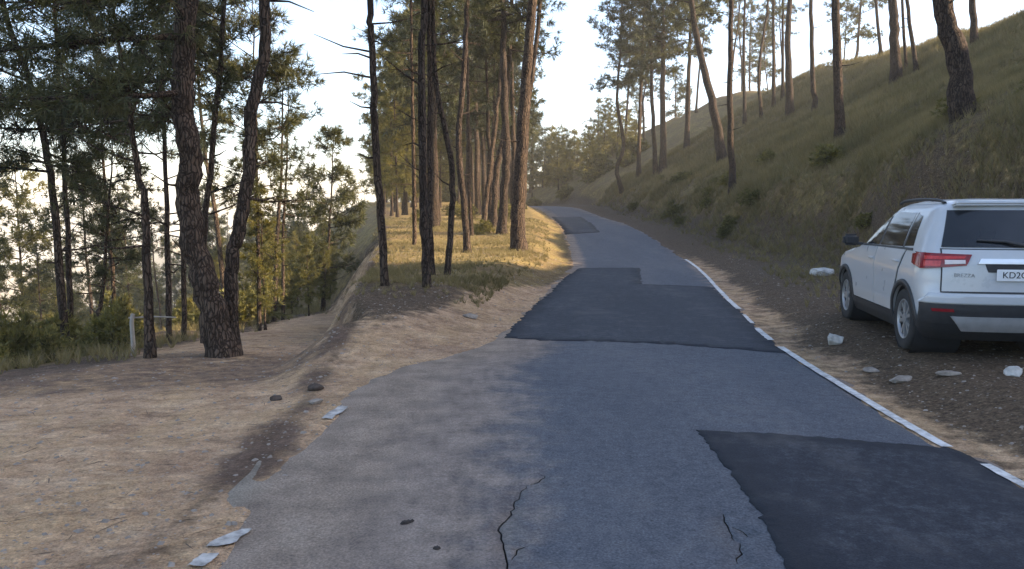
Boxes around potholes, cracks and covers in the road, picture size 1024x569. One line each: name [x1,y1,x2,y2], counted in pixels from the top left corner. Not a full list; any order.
crack [723,514,748,564]
crack [497,477,545,569]
